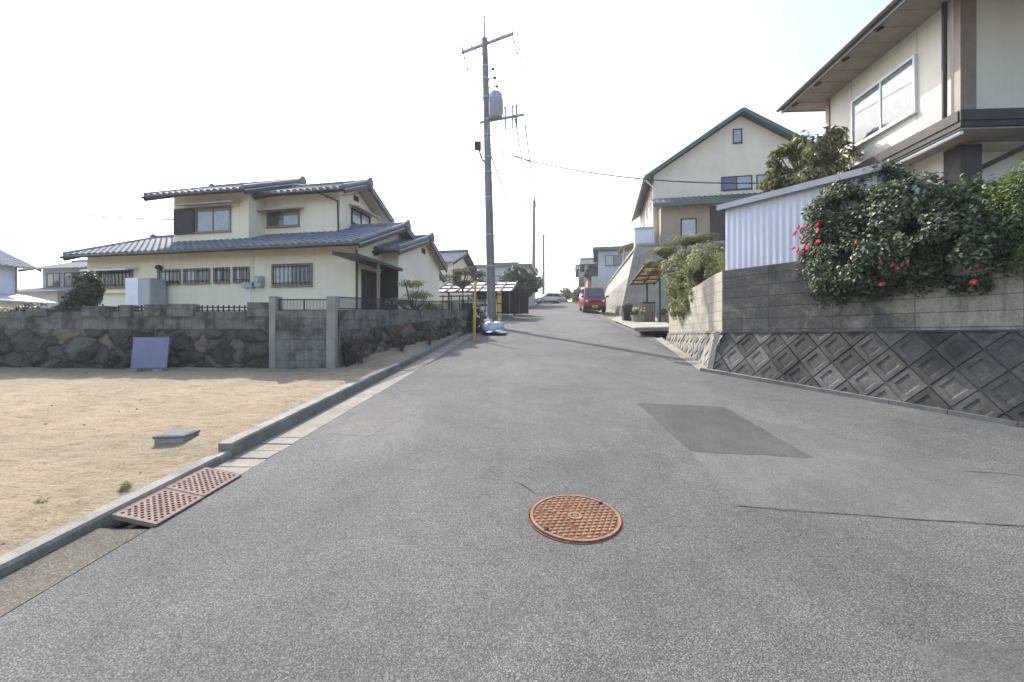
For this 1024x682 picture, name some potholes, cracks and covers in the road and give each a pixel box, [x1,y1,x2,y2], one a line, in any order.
drain grate [112,488,204,528]
drain grate [165,467,241,497]
manhole cover [528,494,624,545]
